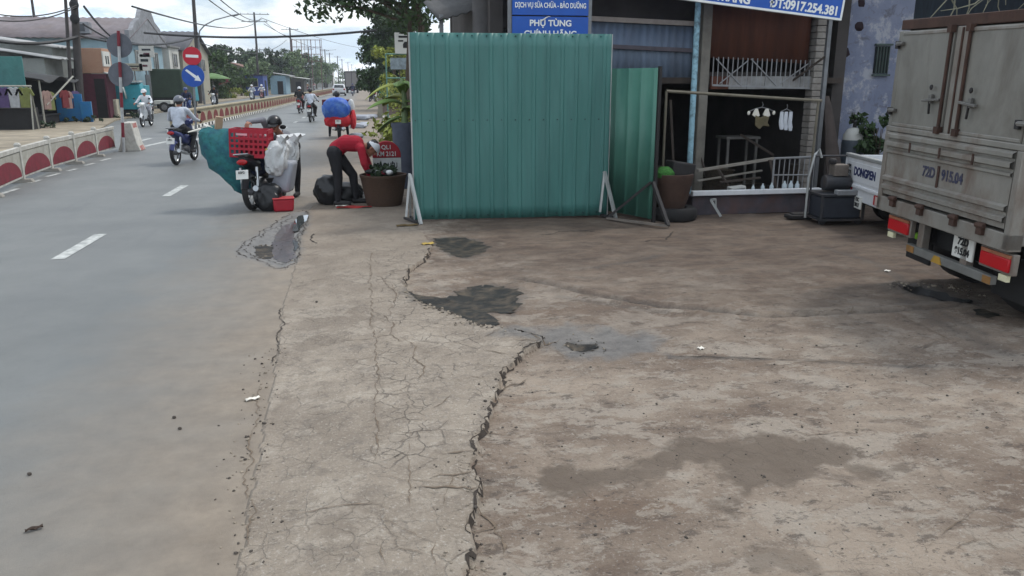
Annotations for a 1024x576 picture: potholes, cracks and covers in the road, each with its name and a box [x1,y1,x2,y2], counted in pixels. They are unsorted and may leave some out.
crack [299,248,564,576]
pothole [549,334,606,356]
pothole [236,210,309,269]
